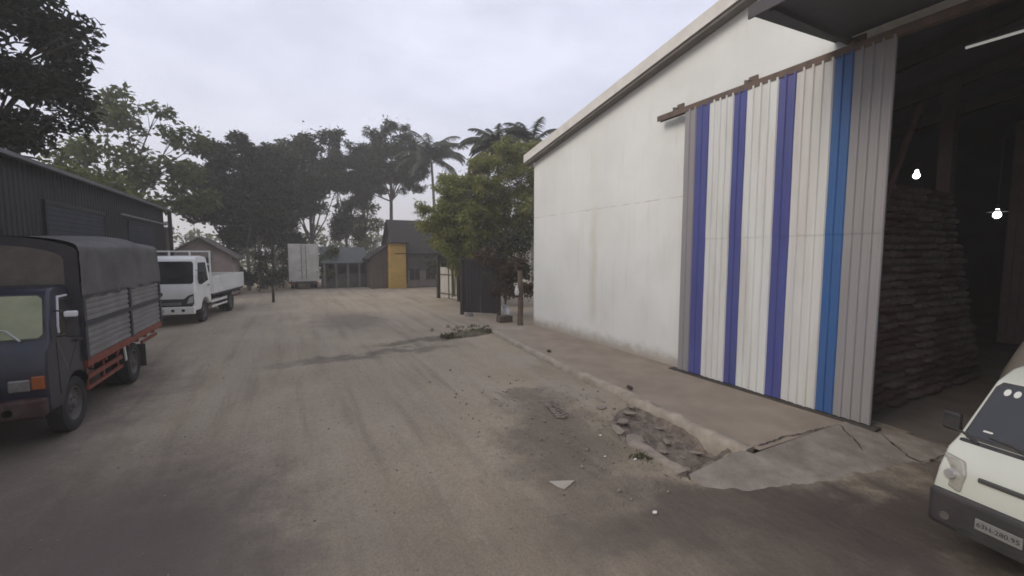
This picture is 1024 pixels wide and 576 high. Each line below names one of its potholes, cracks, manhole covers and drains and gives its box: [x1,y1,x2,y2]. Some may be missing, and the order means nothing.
pothole [609,407,731,478]
crack [884,436,945,462]
